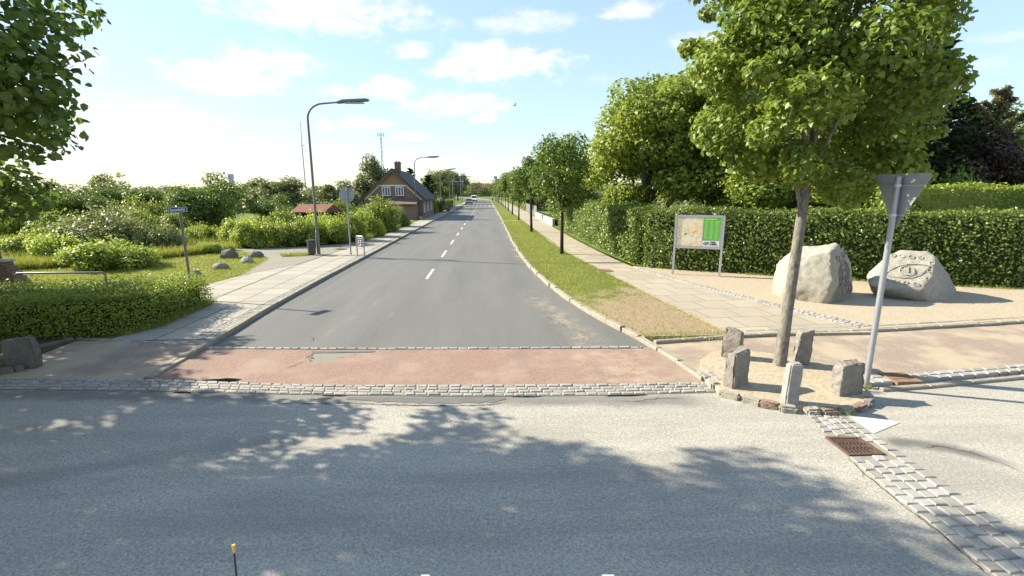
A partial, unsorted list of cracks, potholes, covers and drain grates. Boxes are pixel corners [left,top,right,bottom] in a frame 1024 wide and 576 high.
drain grate [878,372,924,385]
drain grate [825,436,885,456]
